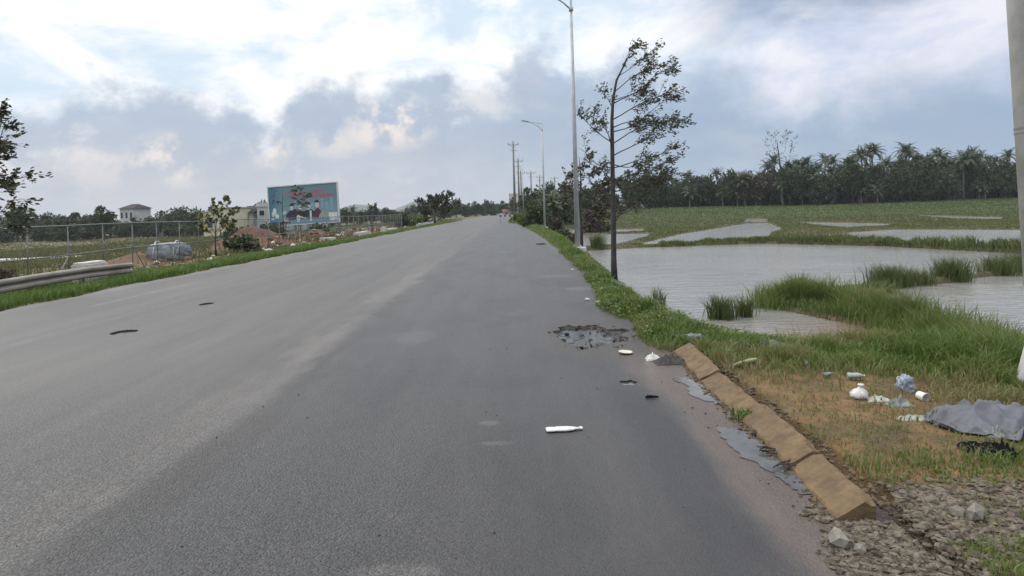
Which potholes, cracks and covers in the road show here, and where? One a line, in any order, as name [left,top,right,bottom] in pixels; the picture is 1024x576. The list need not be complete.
pothole [548,325,636,350]
